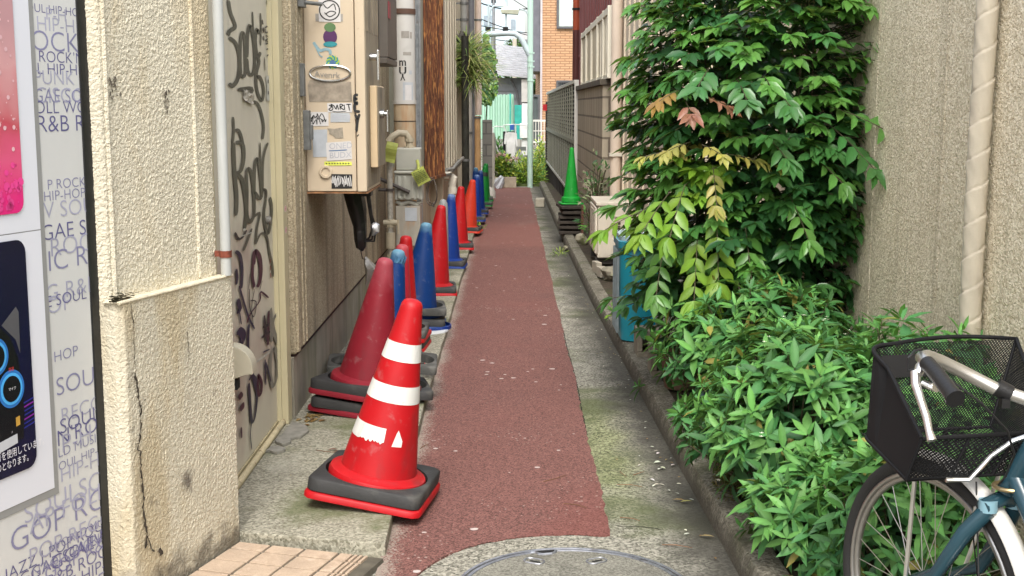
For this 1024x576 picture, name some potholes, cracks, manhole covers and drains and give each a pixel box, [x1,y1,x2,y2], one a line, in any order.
manhole cover [461,547,682,576]
